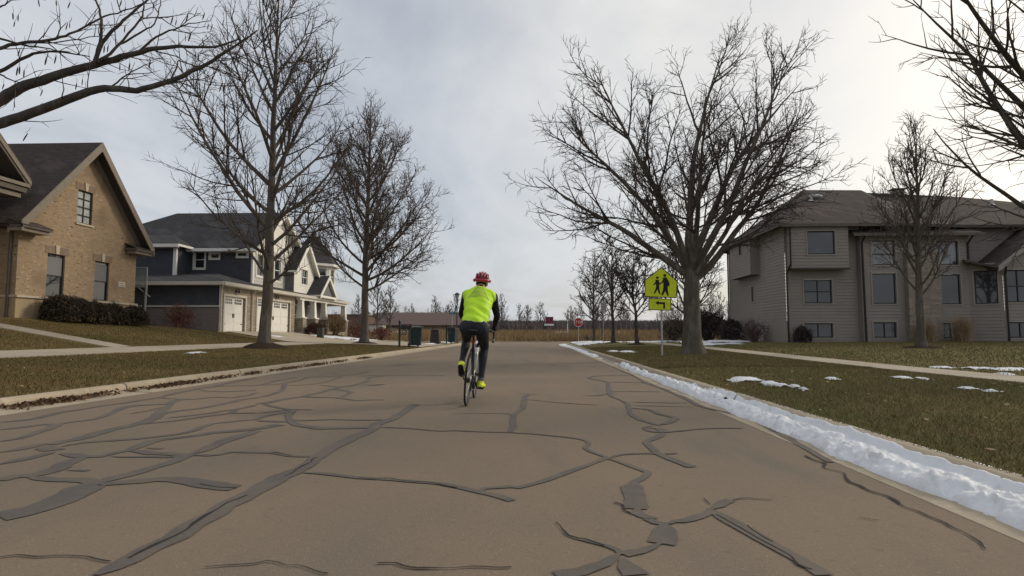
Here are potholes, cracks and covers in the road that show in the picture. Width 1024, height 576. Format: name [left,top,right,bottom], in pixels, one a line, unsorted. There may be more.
crack [205,560,328,574]
crack [805,455,986,549]
